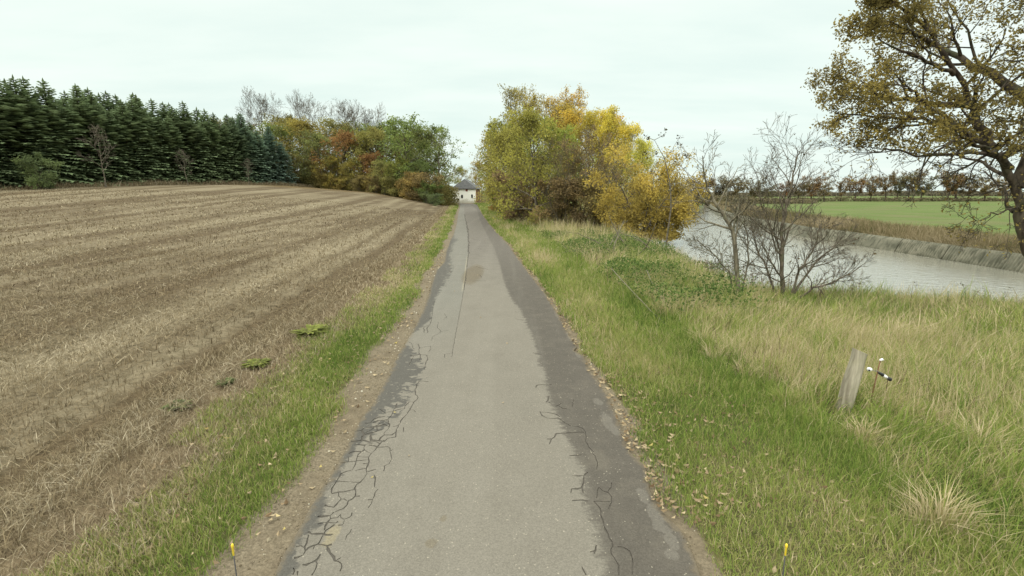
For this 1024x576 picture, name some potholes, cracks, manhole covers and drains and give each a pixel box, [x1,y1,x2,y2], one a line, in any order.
crack [536,385,634,575]
crack [293,301,447,575]
